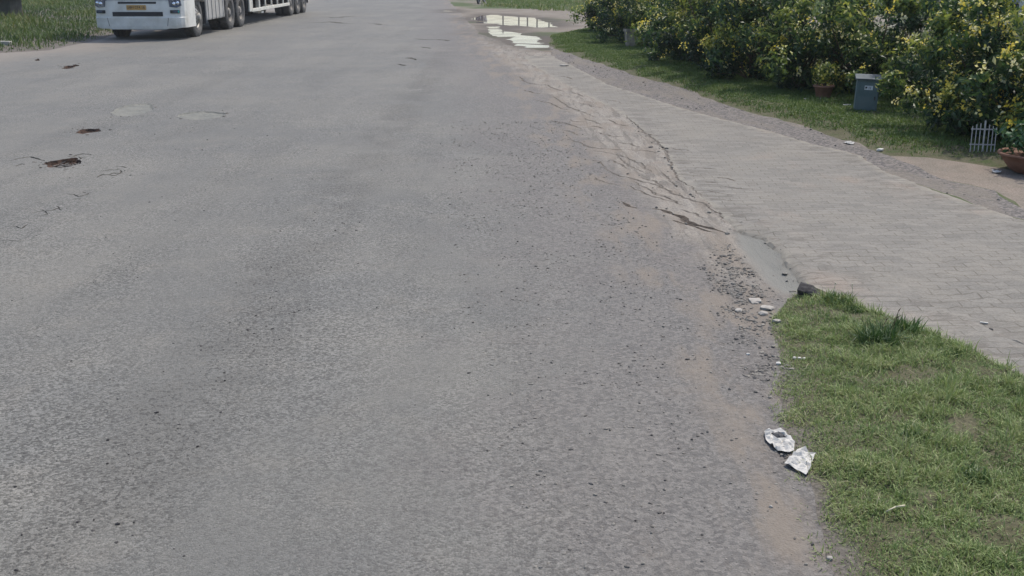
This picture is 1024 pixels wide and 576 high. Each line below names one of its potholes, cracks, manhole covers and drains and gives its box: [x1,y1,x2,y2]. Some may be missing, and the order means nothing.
crack [6,153,126,241]
pothole [44,157,81,167]
crack [519,76,757,233]
